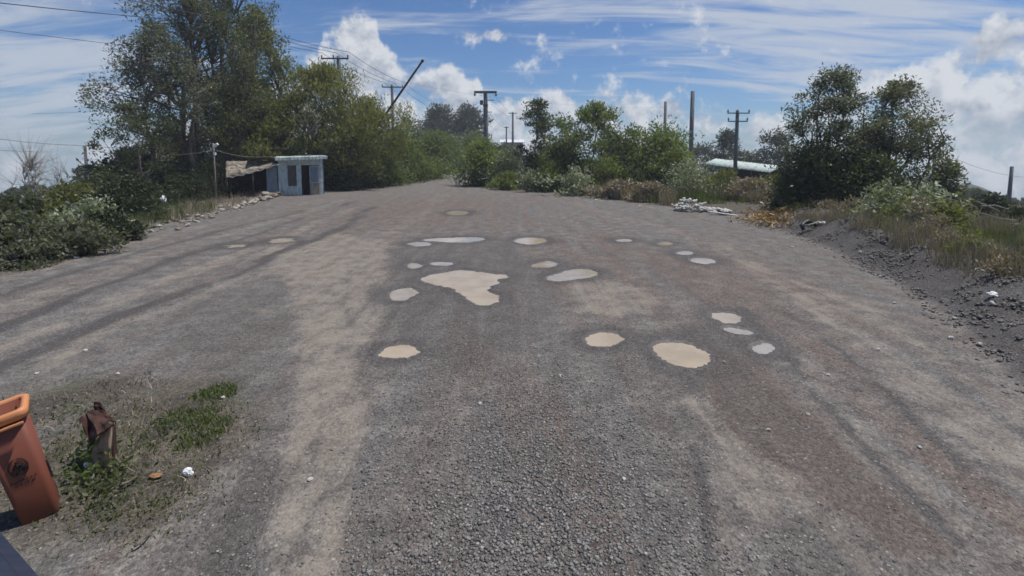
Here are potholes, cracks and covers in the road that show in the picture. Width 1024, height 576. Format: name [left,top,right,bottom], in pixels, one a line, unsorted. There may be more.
pothole [747,340,782,355]
pothole [373,342,425,360]
pothole [647,339,716,370]
pothole [528,260,561,268]
pothole [580,330,629,348]
pothole [511,237,549,245]
pothole [542,268,601,282]
pothole [707,311,746,324]
pothole [719,325,759,336]
pothole [385,286,423,301]
pothole [417,269,512,305]
